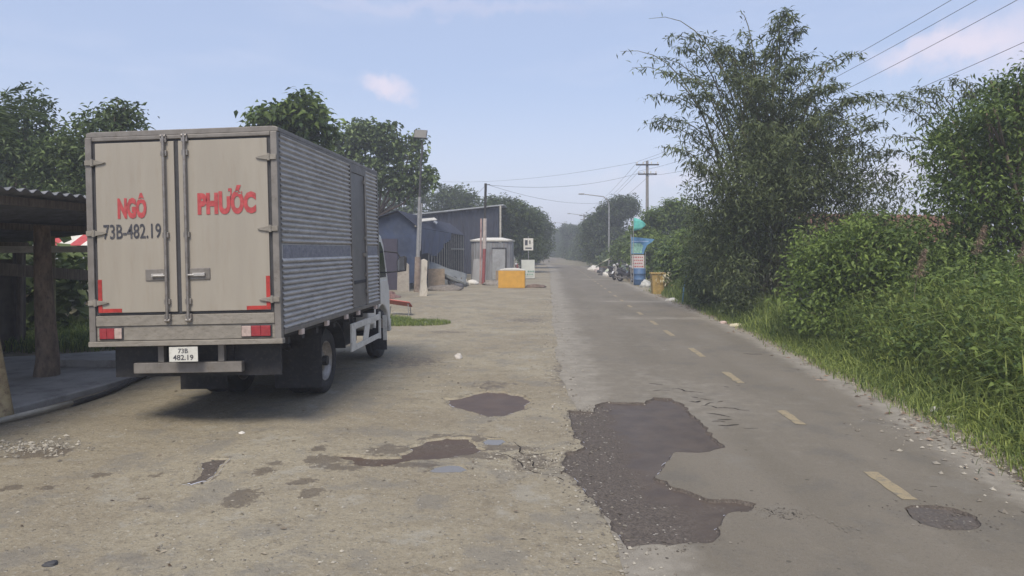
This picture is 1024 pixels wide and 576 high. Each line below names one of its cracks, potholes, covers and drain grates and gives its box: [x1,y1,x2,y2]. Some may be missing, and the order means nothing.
crack [649,383,748,426]
pothole [177,458,230,486]
pothole [332,436,487,467]
pothole [443,391,532,417]
